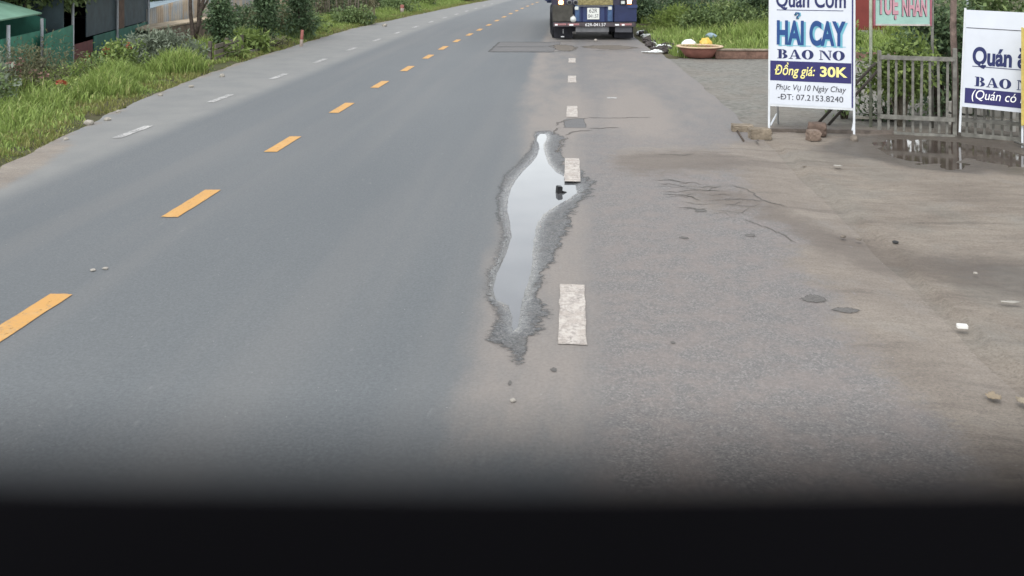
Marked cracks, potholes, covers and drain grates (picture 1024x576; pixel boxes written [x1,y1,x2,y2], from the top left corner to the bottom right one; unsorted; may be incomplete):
crack [656,179,792,241]
pothole [486,131,596,363]
crack [553,117,645,151]
